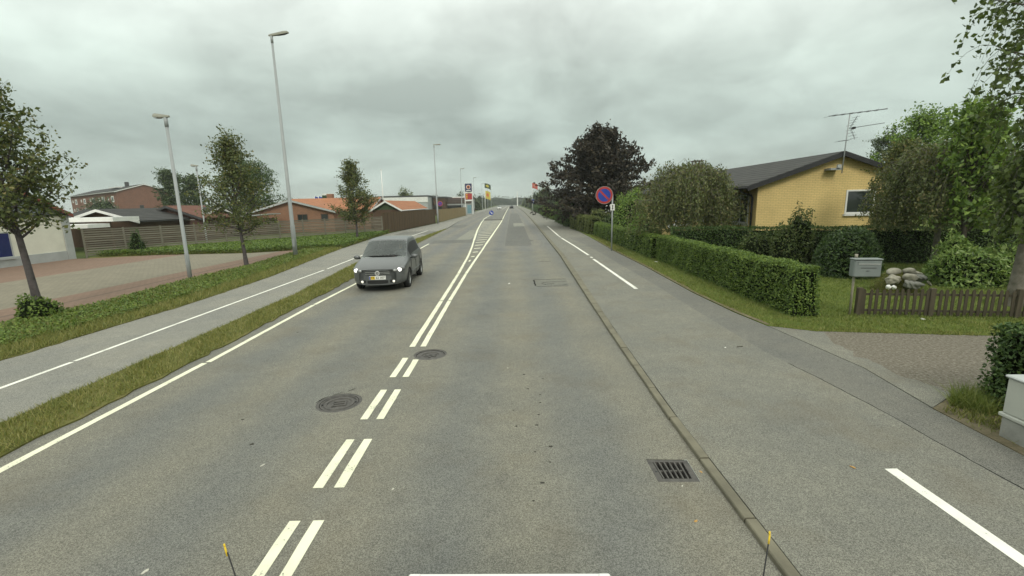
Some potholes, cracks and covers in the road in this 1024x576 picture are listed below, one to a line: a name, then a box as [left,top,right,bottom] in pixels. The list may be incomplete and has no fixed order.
manhole cover [316,394,362,413]
drain grate [647,460,700,482]
manhole cover [414,349,447,360]
